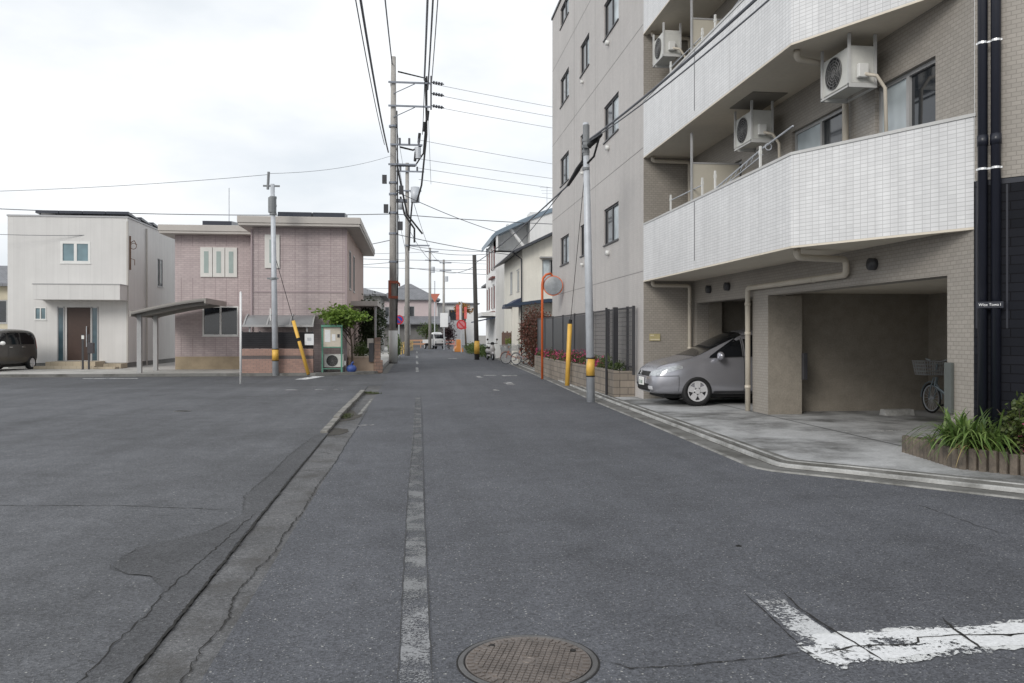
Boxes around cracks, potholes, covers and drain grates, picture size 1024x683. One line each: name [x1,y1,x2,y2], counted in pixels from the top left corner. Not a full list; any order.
manhole cover [456,635,600,683]
crack [4,412,366,683]
